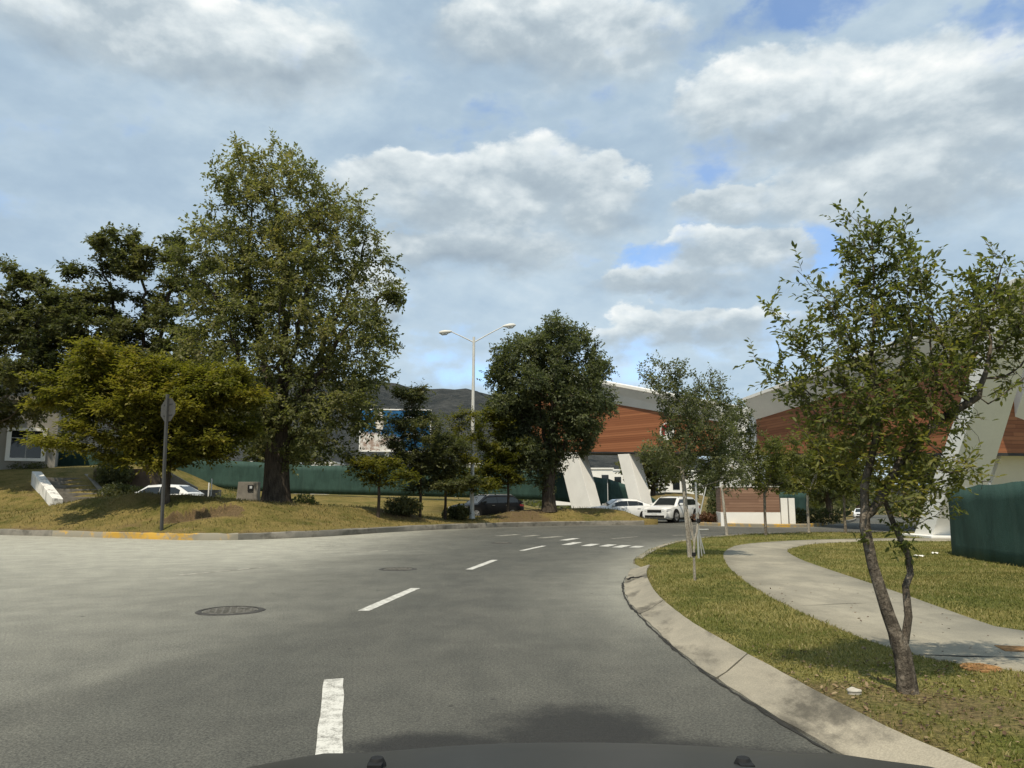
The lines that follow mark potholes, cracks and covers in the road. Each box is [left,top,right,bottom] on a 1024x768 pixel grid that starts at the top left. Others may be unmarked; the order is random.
manhole cover [195,606,266,616]
